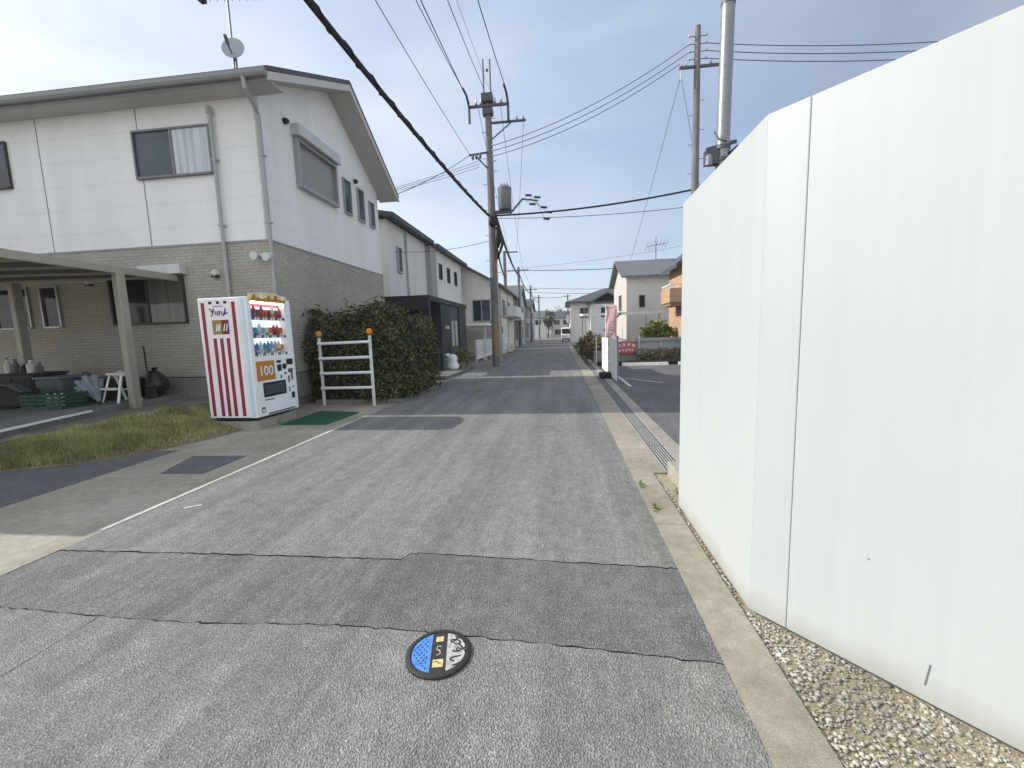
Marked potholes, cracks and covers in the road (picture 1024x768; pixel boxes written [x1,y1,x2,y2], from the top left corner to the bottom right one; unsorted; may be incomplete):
drain grate [646,445,678,474]
drain grate [615,403,635,414]
crack [60,550,676,569]
manhole cover [405,629,471,681]
crack [0,606,724,677]
drain grate [633,427,664,446]
drain grate [623,413,647,427]
